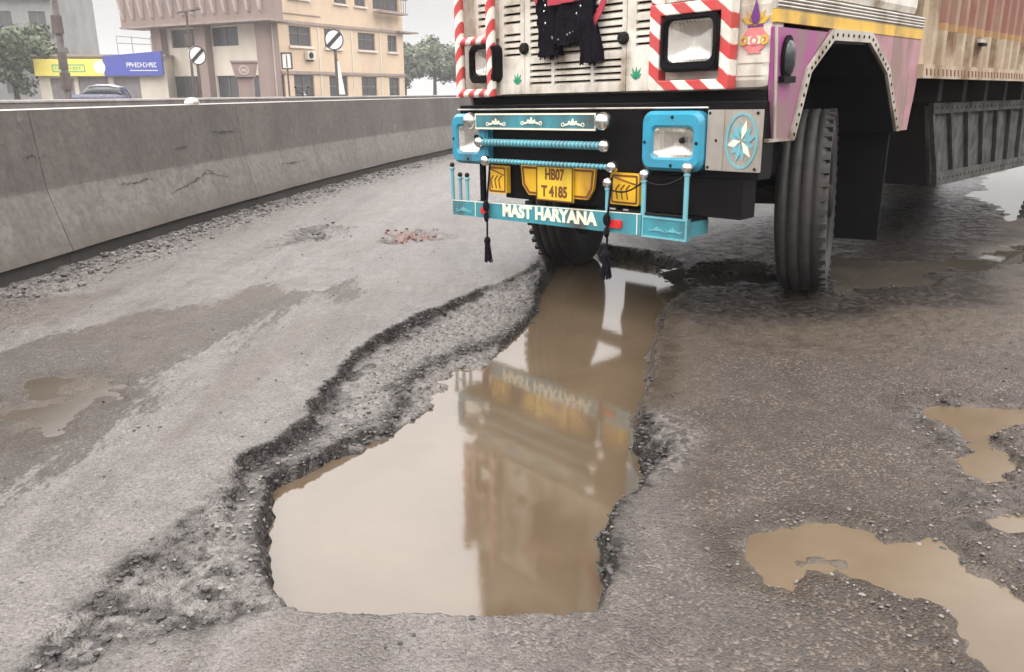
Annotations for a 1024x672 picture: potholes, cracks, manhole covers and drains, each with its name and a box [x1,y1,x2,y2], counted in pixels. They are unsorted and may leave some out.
pothole [904,396,1024,488]
pothole [261,223,359,250]
pothole [369,227,471,246]
pothole [2,239,700,672]
pothole [721,510,1024,672]
